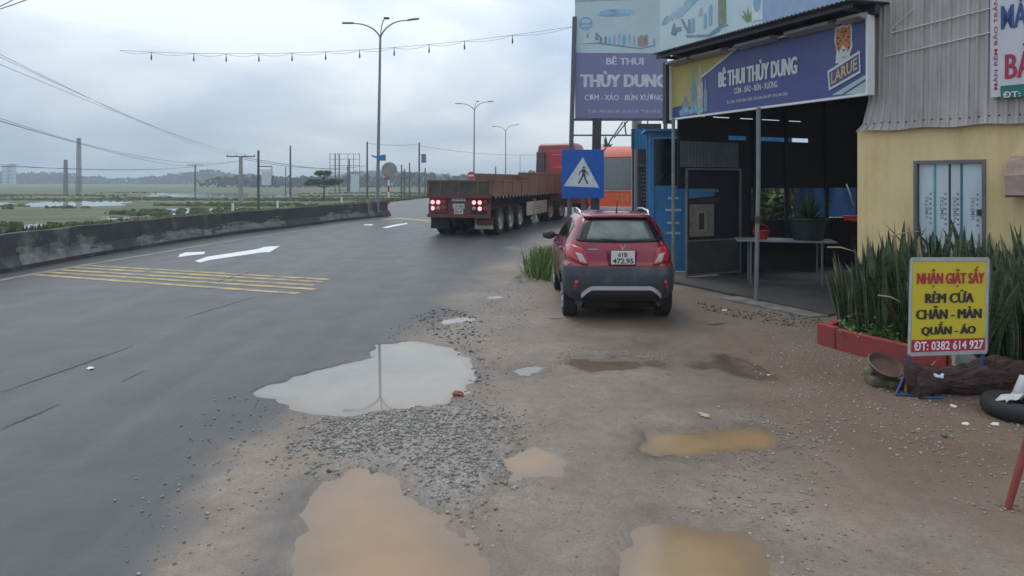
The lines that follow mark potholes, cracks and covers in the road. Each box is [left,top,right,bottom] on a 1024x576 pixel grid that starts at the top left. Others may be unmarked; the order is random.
pothole [561,355,647,373]
pothole [627,423,793,459]
pothole [429,316,479,325]
pothole [477,441,579,486]
pothole [510,363,552,377]
pothole [243,339,487,419]
pothole [712,354,777,381]
pothole [259,449,514,576]
pothole [691,362,719,370]
pothole [581,513,807,576]
